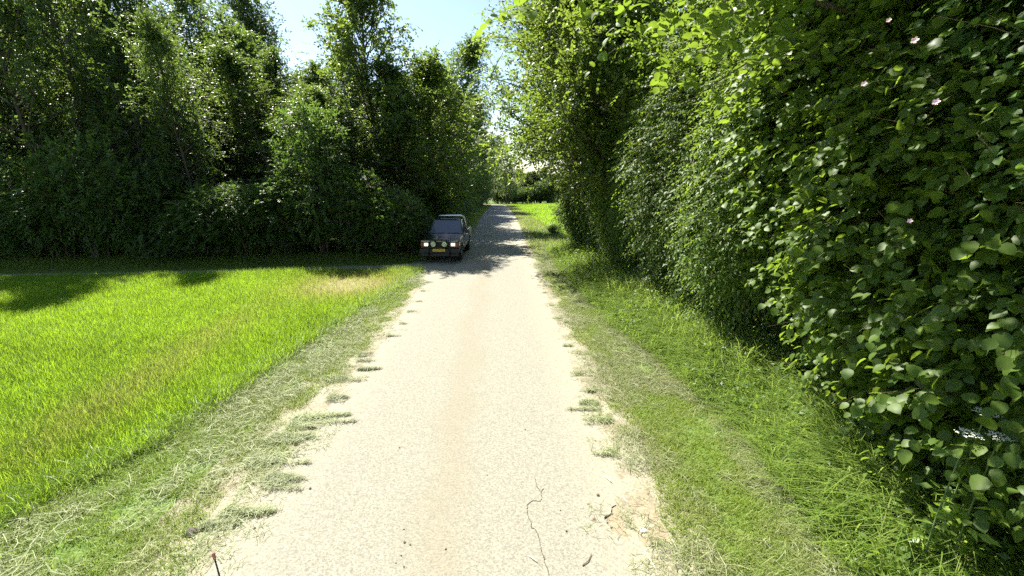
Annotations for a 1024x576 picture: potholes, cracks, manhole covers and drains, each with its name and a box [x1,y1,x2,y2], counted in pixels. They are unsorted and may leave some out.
crack [527,480,549,576]
